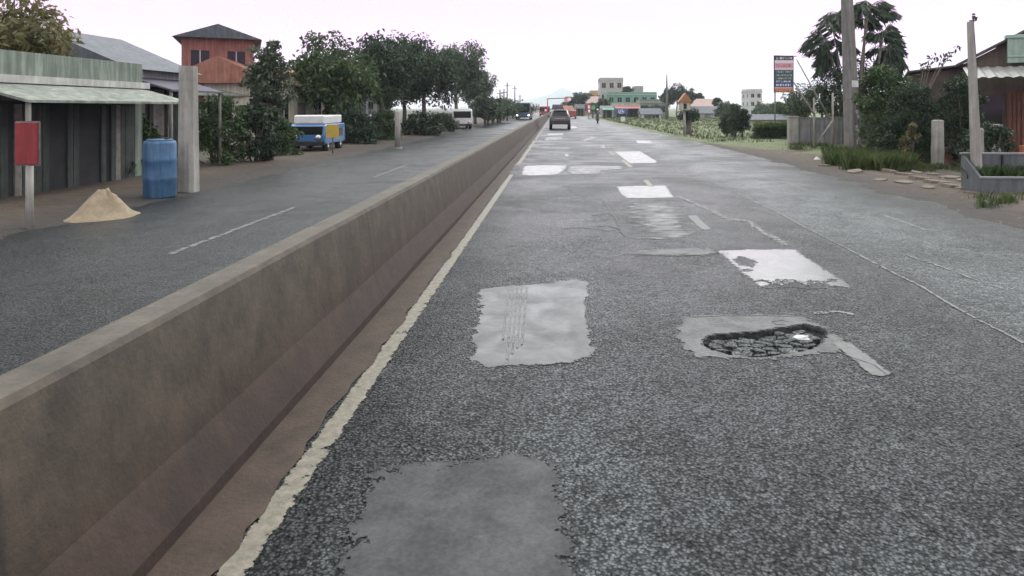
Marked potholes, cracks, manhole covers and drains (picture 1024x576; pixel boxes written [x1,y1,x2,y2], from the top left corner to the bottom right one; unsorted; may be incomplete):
crack [571,200,667,236]
crack [907,255,1007,290]
crack [814,311,854,333]
pothole [703,324,828,357]
